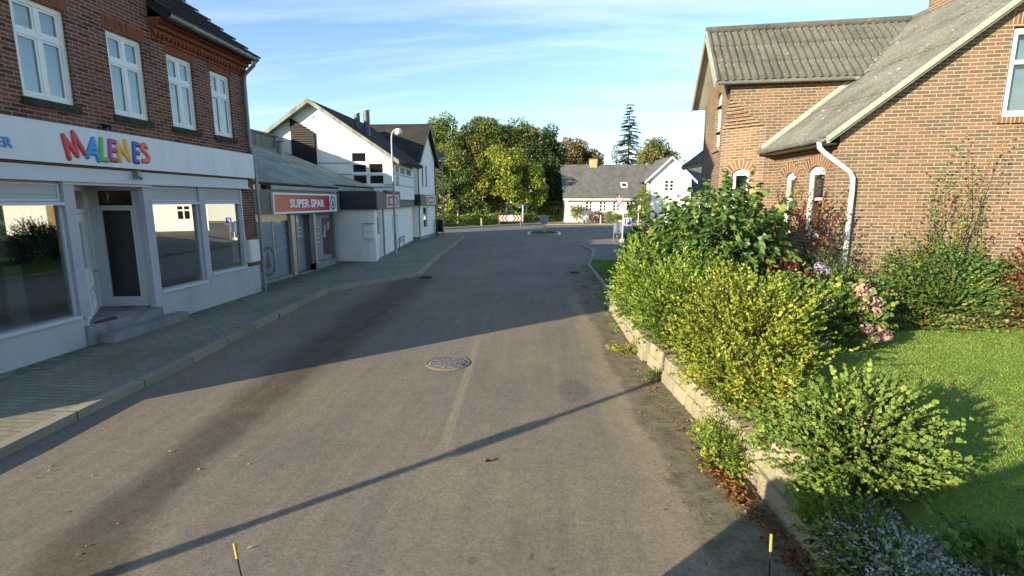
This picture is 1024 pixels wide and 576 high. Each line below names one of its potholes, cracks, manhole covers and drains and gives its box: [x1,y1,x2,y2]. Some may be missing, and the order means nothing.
manhole cover [425,356,470,371]
